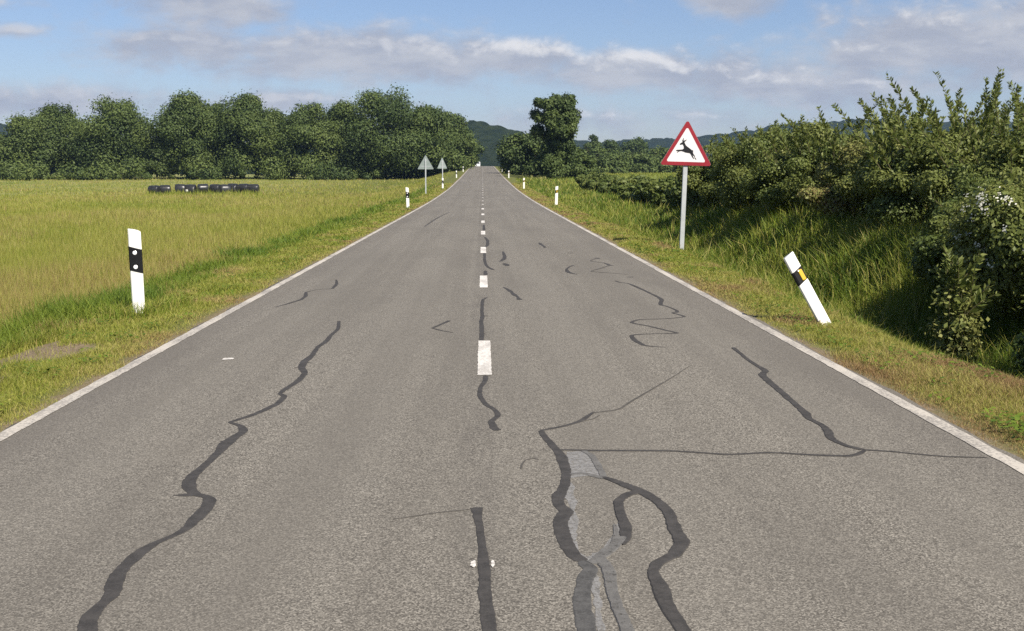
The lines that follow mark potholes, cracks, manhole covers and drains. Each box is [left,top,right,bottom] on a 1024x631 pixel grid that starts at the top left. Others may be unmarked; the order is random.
crack [395,509,469,519]
crack [520,347,987,631]
